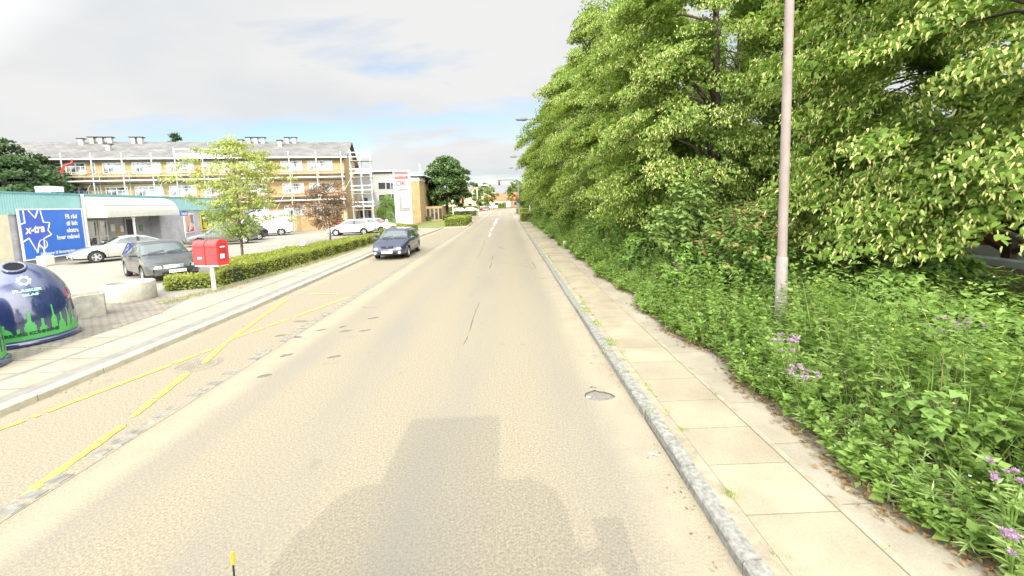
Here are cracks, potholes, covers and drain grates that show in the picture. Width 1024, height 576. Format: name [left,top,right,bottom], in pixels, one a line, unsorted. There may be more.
manhole cover [172,357,223,373]
pothole [585,386,615,401]
